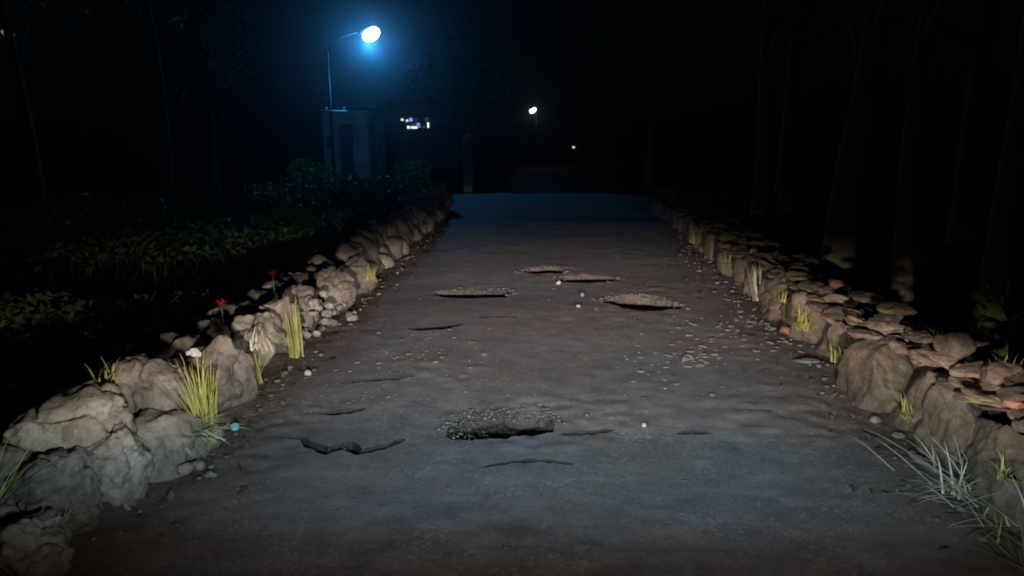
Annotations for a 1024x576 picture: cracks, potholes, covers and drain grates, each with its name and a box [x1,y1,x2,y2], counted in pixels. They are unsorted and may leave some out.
pothole [600,294,684,311]
pothole [430,289,513,299]
pothole [519,266,571,274]
crack [340,376,415,384]
crack [319,408,365,416]
pothole [554,274,622,283]
pothole [444,408,556,441]
crack [290,437,406,455]
crack [481,458,573,469]
